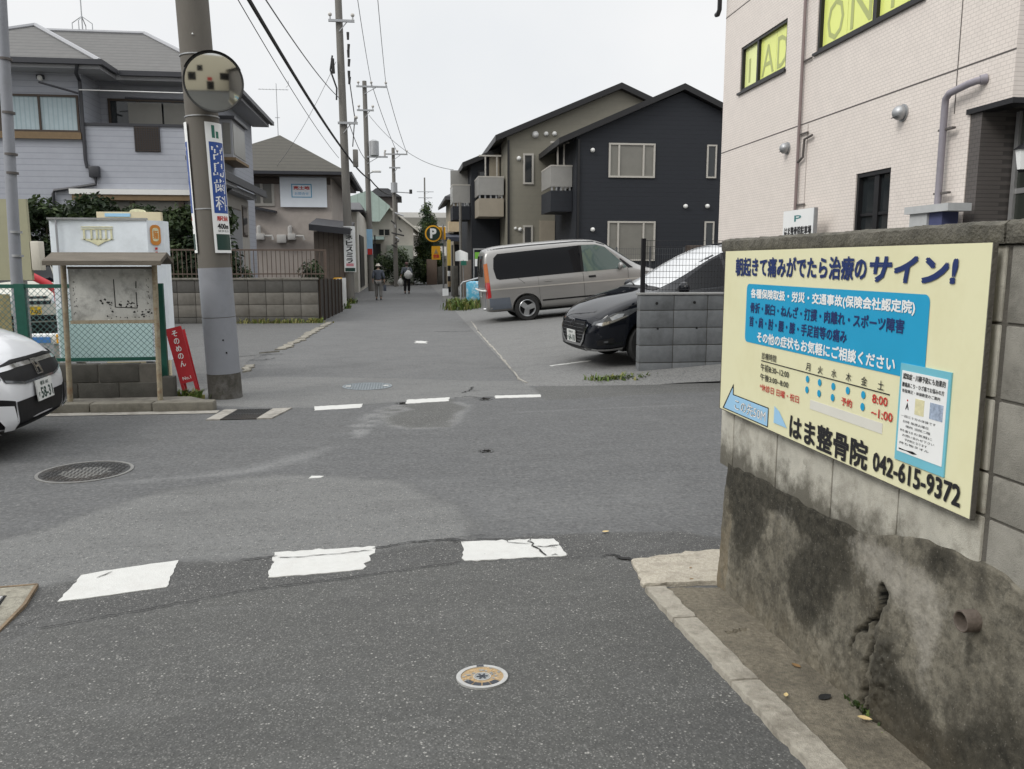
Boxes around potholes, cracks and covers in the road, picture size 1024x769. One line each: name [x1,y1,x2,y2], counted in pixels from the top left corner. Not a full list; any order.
manhole cover [342,382,392,390]
crack [247,534,560,559]
drain grate [206,408,292,421]
manhole cover [456,665,508,690]
manhole cover [34,460,134,484]
